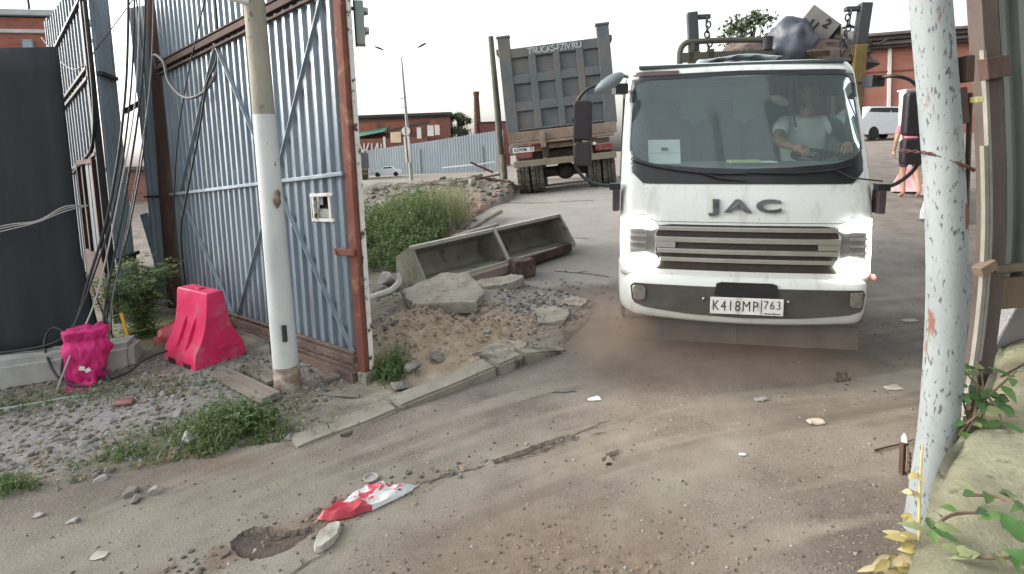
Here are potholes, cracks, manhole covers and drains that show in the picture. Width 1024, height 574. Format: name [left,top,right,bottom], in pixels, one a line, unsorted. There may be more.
pothole [217,517,327,572]
